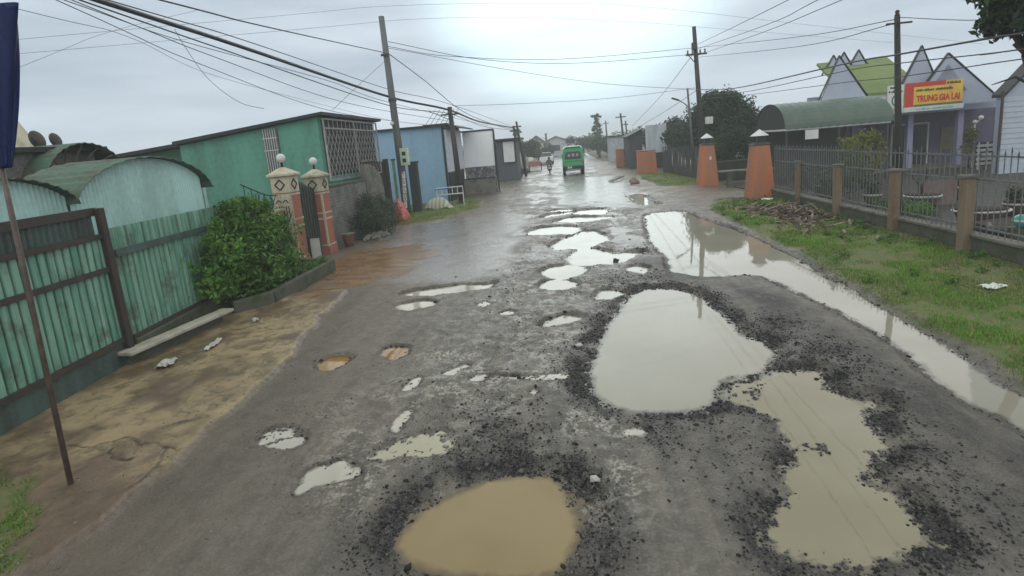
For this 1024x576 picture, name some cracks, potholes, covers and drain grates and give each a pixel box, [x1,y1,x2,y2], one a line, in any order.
pothole [567,282,798,424]
pothole [544,228,654,267]
pothole [534,309,592,328]
pothole [246,420,317,454]
pothole [306,350,361,373]
pothole [352,450,625,576]
pothole [719,357,989,576]
pothole [388,297,442,312]
pothole [371,341,418,362]
pothole [520,223,589,236]
pothole [531,277,585,292]
pothole [394,279,501,297]
